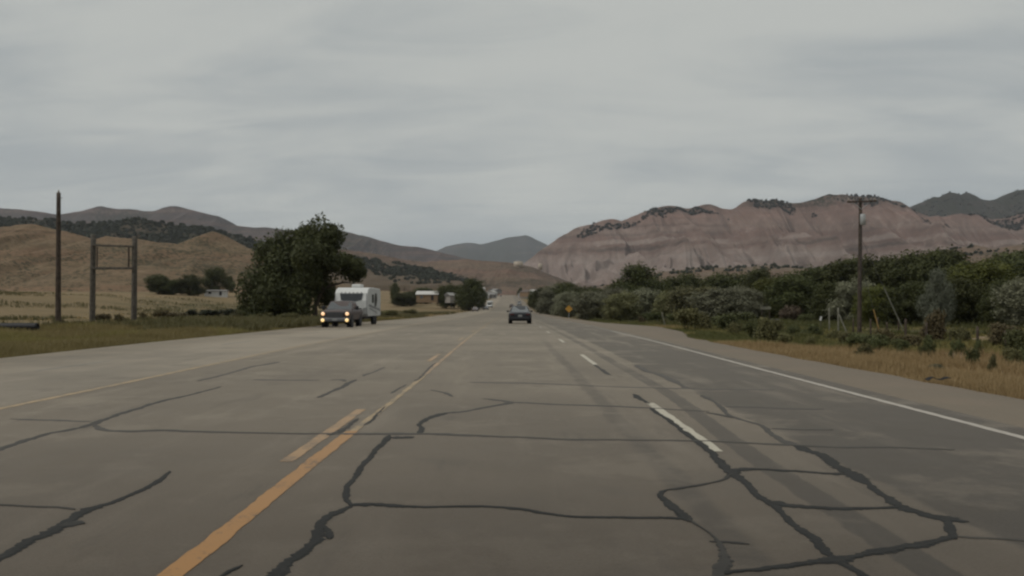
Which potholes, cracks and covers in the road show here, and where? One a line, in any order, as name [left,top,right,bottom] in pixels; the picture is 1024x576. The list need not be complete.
crack [0,471,171,562]
crack [0,362,1024,542]
